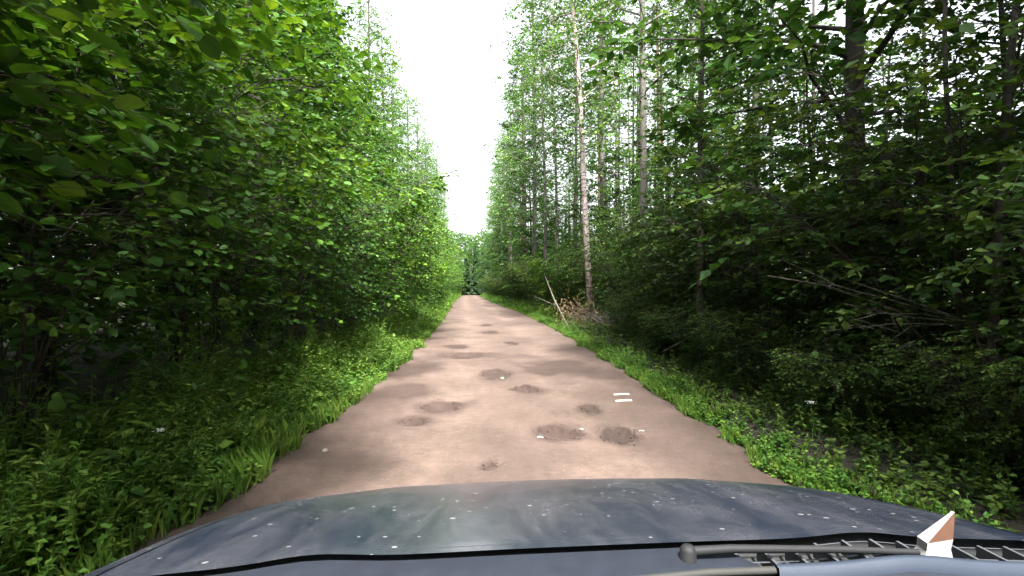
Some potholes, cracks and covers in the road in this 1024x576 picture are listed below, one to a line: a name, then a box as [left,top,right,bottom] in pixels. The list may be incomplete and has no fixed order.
pothole [479,368,514,380]
pothole [509,384,544,393]
pothole [534,423,588,441]
pothole [398,416,427,426]
pothole [416,399,464,414]
pothole [580,404,602,415]
pothole [597,424,641,446]
